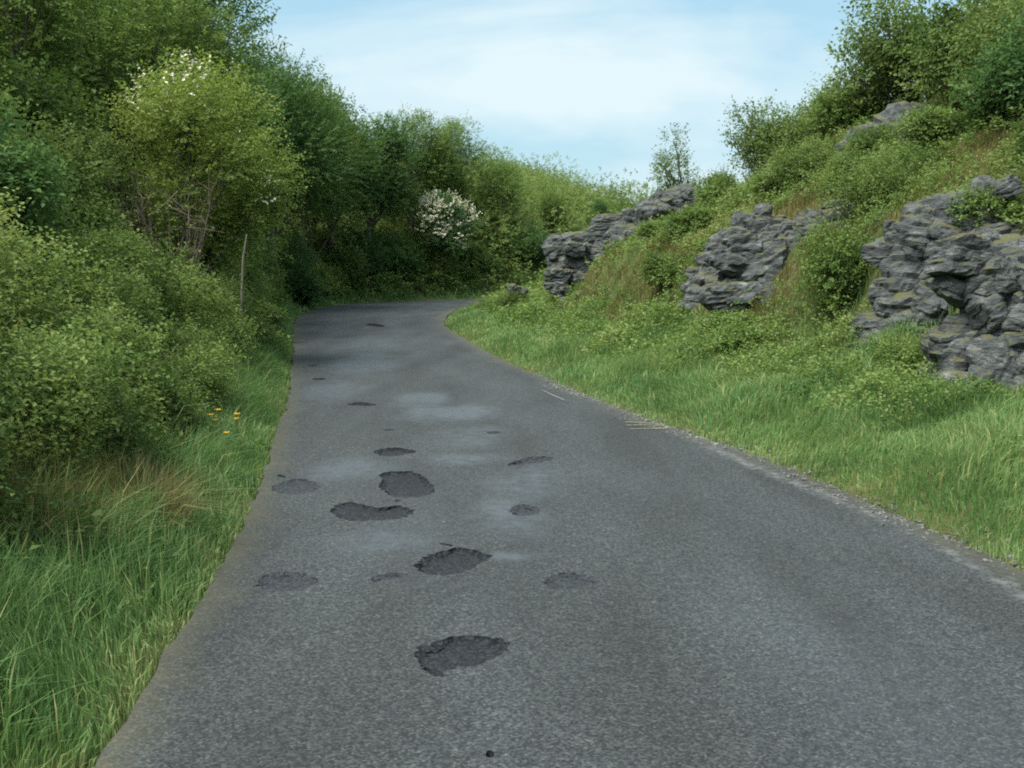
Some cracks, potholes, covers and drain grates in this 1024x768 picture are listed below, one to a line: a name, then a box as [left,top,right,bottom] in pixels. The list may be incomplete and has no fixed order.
pothole [373,447,416,456]
pothole [271,479,321,495]
pothole [509,504,540,516]
pothole [255,571,319,591]
pothole [507,456,553,466]
pothole [371,573,407,582]
pothole [543,572,596,589]
pothole [330,502,414,521]
pothole [378,471,435,498]
pothole [414,635,510,677]
pothole [411,547,492,576]
